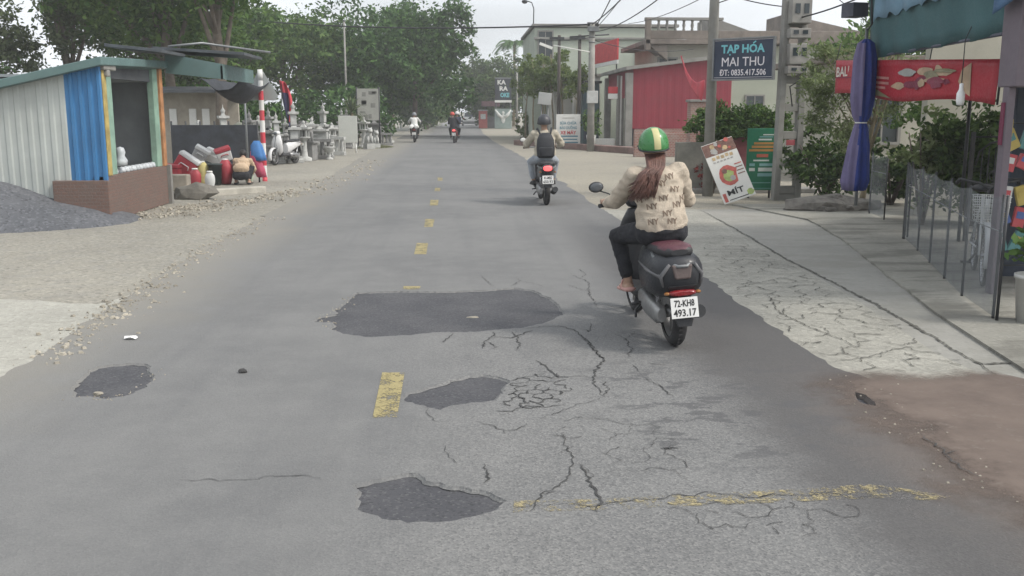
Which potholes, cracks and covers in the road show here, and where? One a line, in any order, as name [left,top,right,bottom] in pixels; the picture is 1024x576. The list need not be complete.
crack [704,237,961,371]
crack [518,363,902,536]
crack [504,269,639,418]
crack [923,435,978,476]
